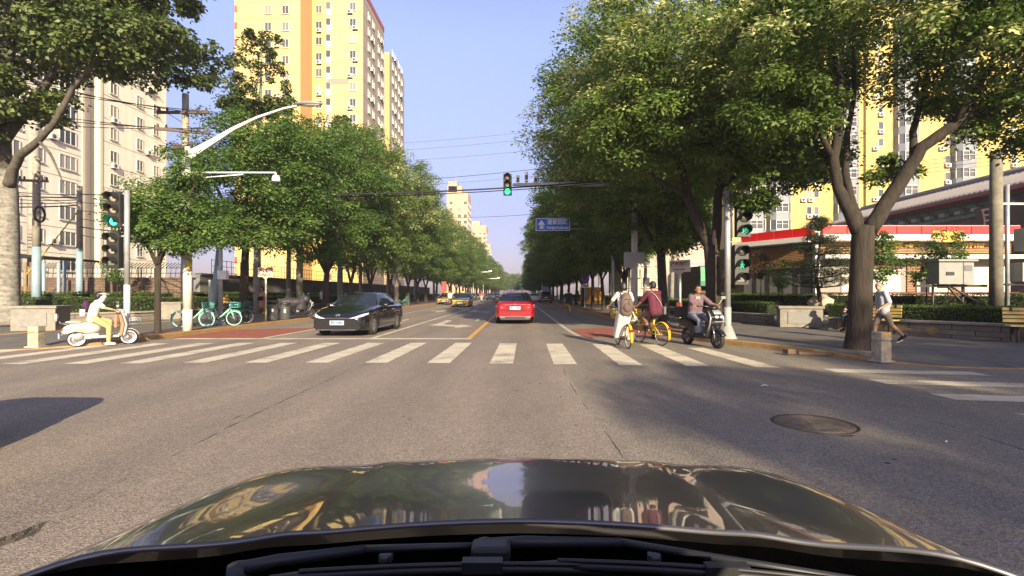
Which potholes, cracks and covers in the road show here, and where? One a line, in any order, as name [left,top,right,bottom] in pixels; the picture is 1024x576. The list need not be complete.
manhole cover [770,414,861,434]
